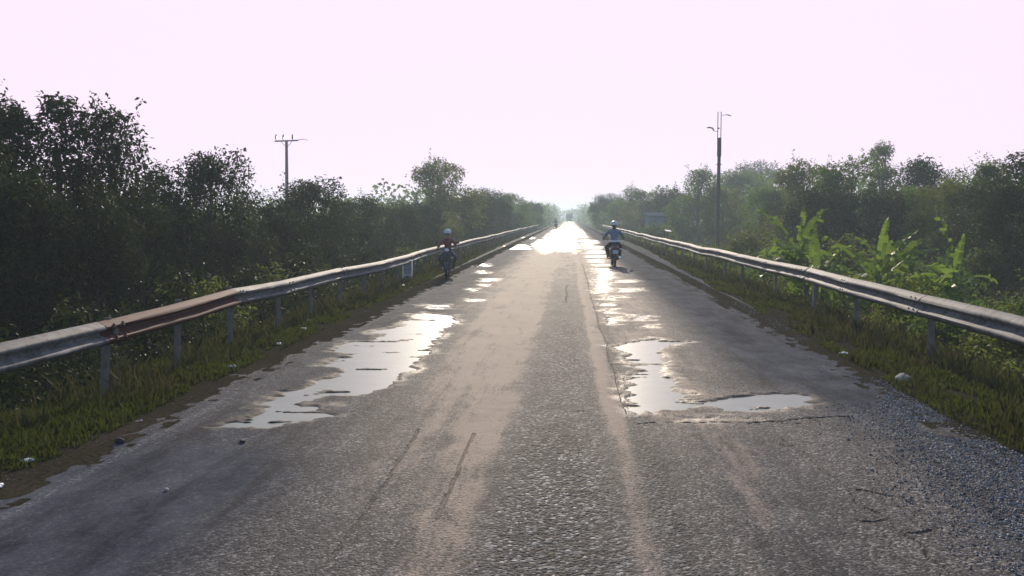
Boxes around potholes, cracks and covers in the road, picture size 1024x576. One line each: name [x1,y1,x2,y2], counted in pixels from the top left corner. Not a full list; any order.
pothole [606,337,823,416]
crack [325,429,477,563]
pothole [200,311,461,429]
